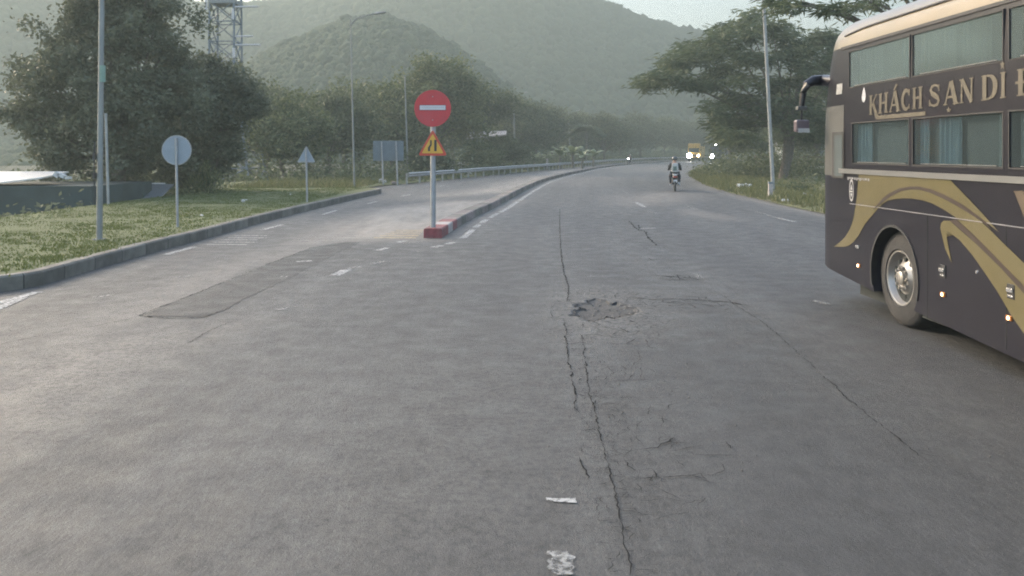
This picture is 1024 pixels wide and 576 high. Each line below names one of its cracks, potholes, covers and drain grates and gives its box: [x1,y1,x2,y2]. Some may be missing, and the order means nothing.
pothole [571,298,639,321]
crack [548,212,942,574]
